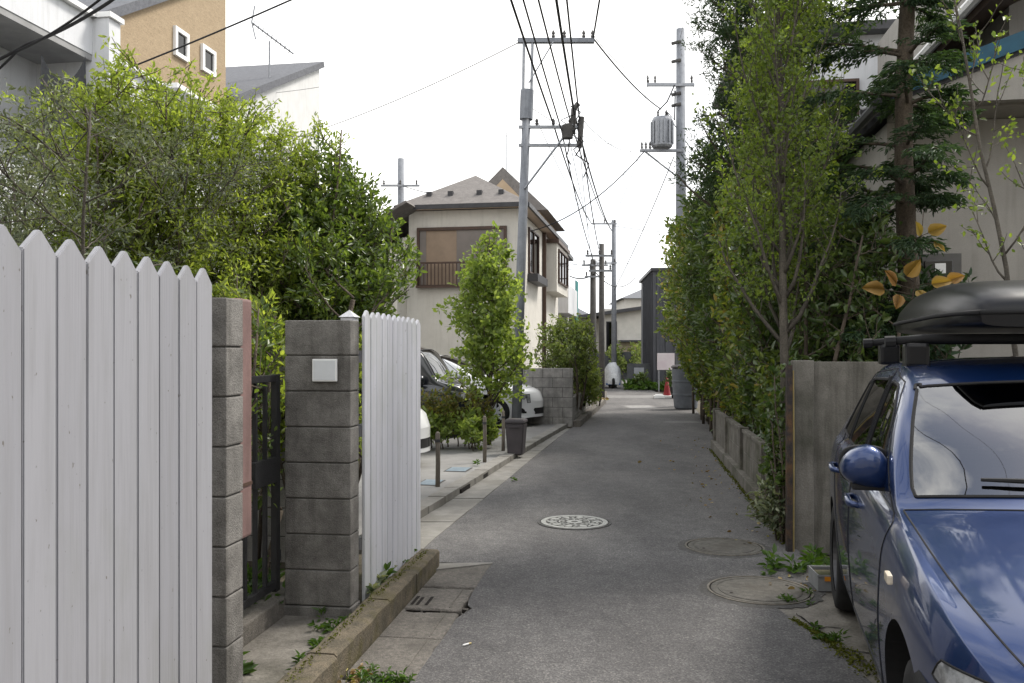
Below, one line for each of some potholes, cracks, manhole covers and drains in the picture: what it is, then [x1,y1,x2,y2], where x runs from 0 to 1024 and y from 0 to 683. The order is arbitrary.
manhole cover [538,515,611,530]
manhole cover [677,537,773,559]
manhole cover [698,575,824,609]
